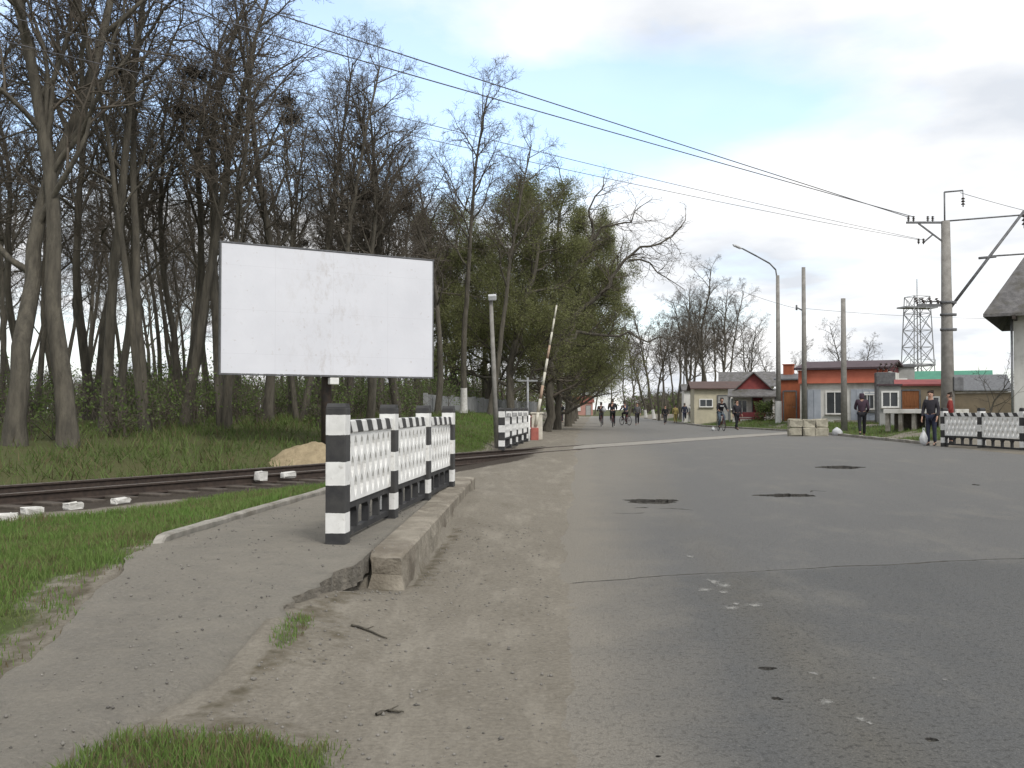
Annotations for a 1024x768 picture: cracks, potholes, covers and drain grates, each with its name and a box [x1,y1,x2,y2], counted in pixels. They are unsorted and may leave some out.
crack [569,558,1024,584]
